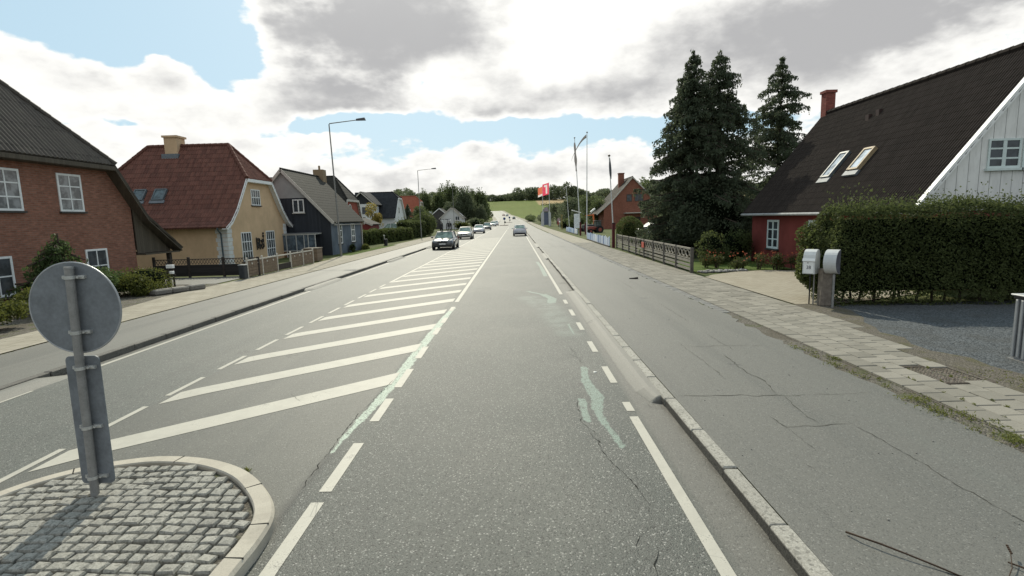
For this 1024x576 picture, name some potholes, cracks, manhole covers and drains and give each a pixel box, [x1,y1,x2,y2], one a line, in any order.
crack [681,339,1023,521]
crack [577,402,660,576]
